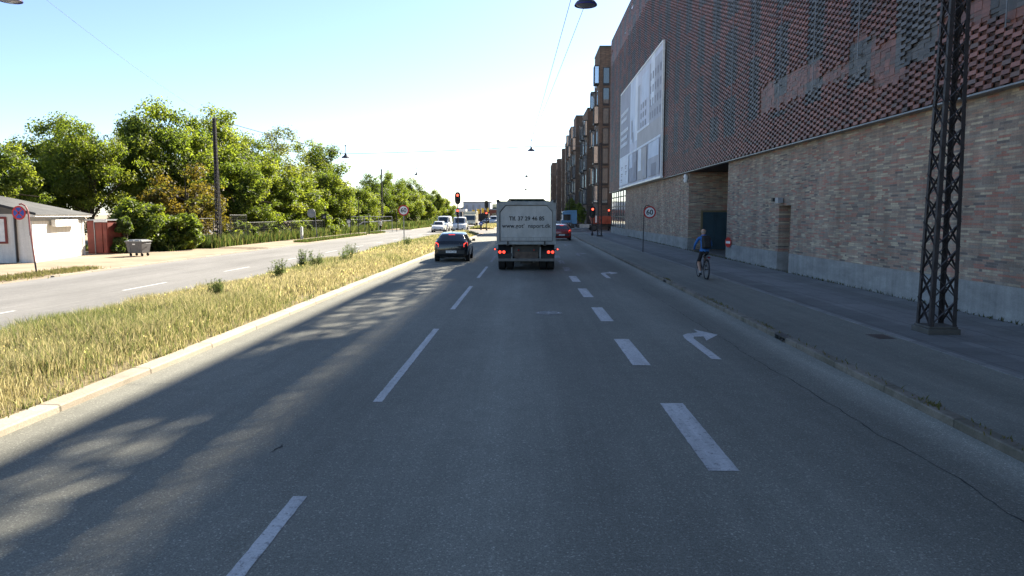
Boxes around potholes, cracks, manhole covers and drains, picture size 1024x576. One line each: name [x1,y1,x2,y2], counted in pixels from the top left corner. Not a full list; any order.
crack [643,289,1024,522]
